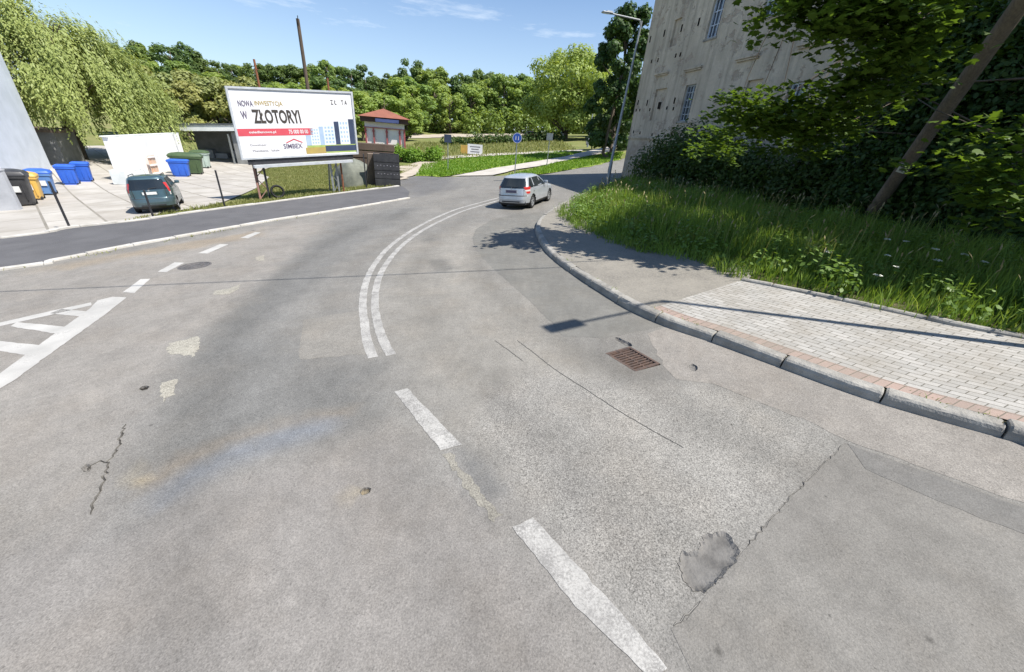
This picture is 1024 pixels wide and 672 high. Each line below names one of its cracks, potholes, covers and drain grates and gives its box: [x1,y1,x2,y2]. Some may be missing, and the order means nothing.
manhole cover [177,262,212,270]
crack [87,424,126,514]
crack [673,447,840,626]
drain grate [606,346,660,371]
